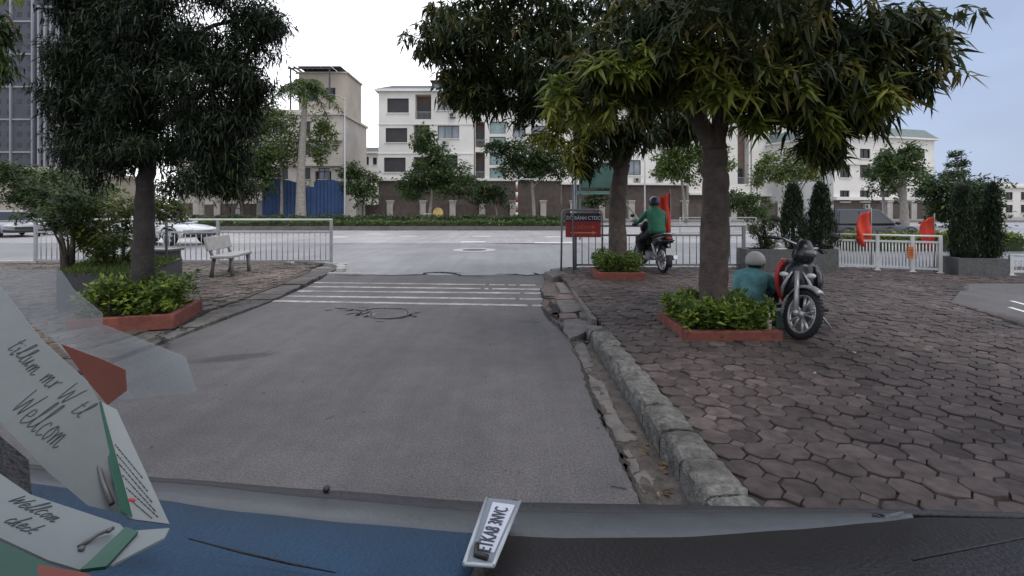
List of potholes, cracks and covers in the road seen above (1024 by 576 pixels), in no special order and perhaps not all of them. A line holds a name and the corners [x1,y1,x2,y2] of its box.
manhole cover [368,309,411,319]
